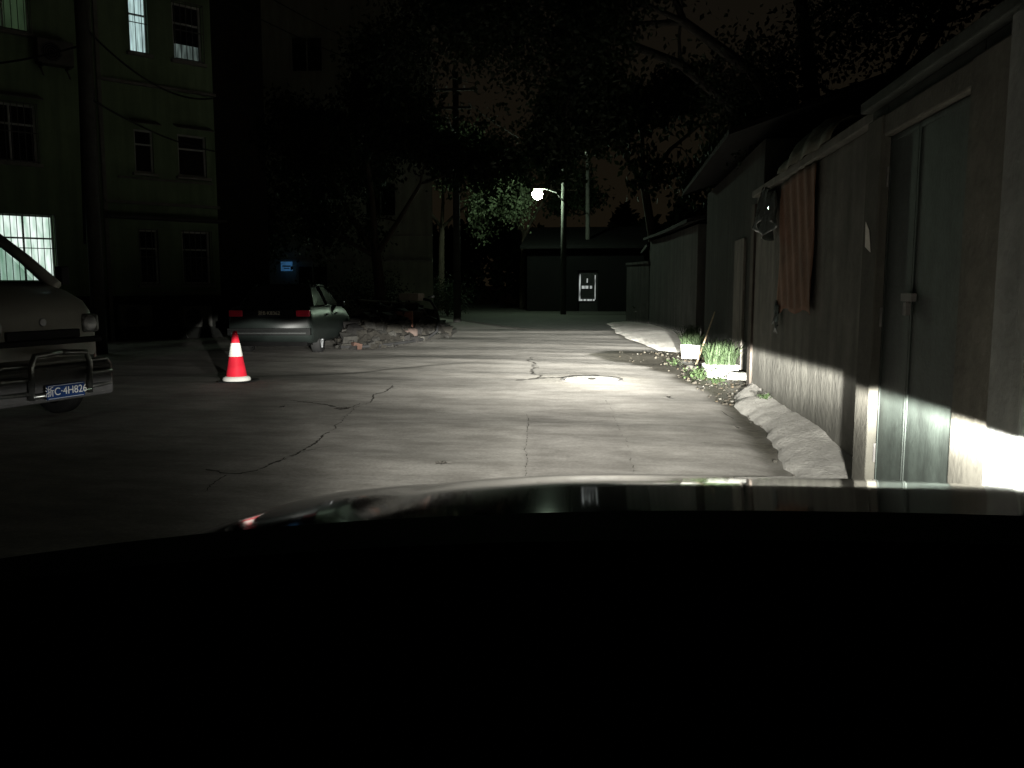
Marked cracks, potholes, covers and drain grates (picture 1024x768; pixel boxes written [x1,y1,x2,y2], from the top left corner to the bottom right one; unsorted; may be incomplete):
crack [518,359,600,380]
crack [206,385,394,491]
